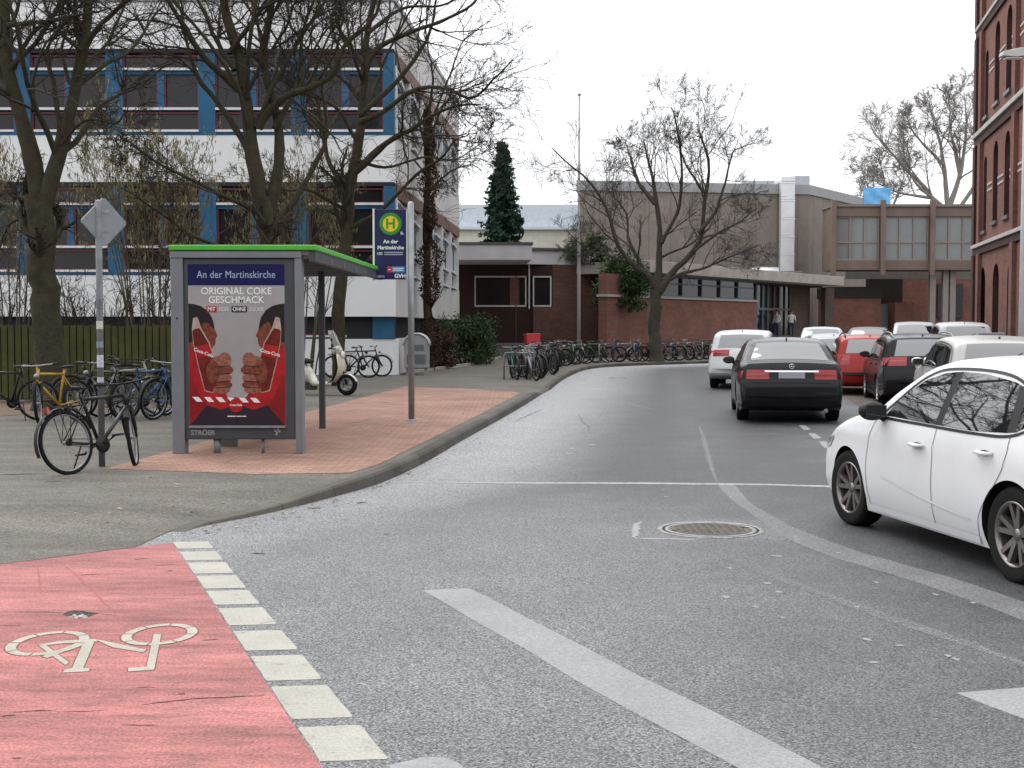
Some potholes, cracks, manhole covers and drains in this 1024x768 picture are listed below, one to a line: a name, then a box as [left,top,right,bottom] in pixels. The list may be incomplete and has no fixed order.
pothole [62,610,98,619]
manhole cover [657,521,764,538]
crack [3,709,106,717]
crack [136,687,265,705]
crack [37,559,115,615]
